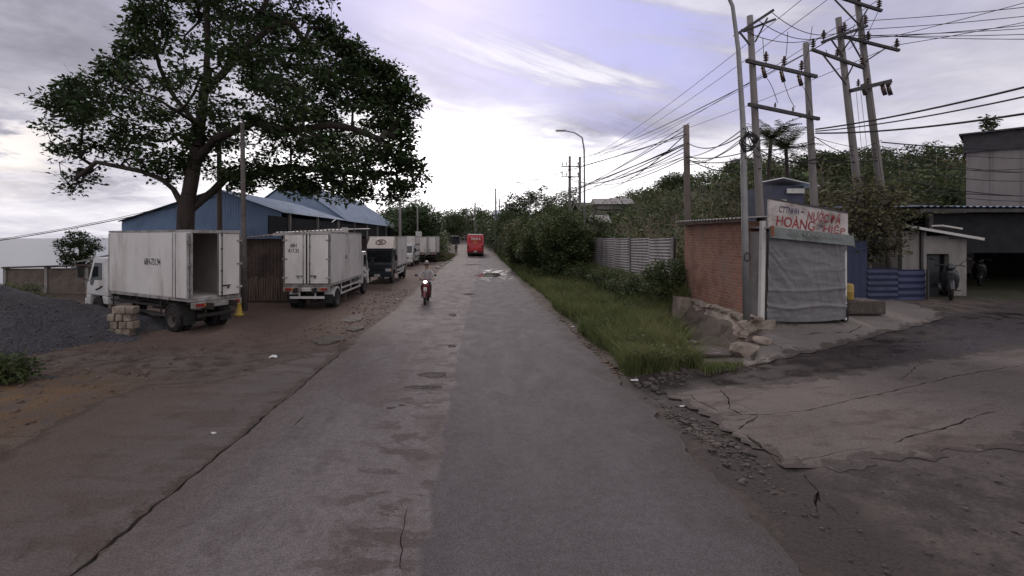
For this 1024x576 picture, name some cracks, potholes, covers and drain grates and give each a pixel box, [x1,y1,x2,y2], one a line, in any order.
crack [70,353,342,576]
crack [894,411,997,443]
crack [689,388,881,517]
crack [783,365,1022,413]
crack [399,511,407,575]
